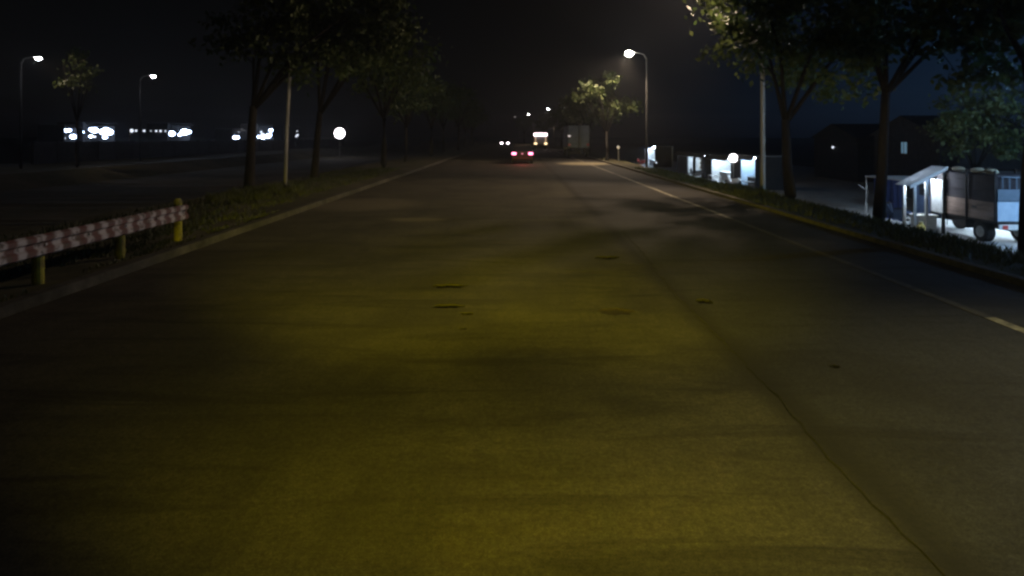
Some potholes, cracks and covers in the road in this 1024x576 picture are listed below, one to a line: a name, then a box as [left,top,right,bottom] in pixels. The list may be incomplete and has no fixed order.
pothole [597,308,636,316]
